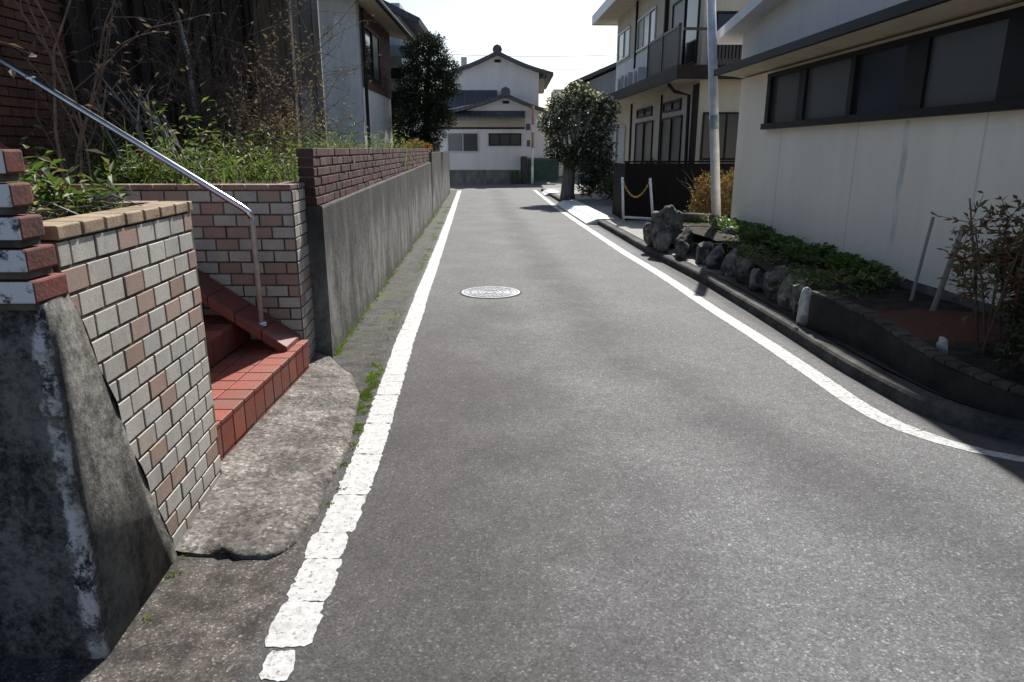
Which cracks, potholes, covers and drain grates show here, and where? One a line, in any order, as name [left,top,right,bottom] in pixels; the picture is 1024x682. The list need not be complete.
manhole cover [459,286,522,299]
